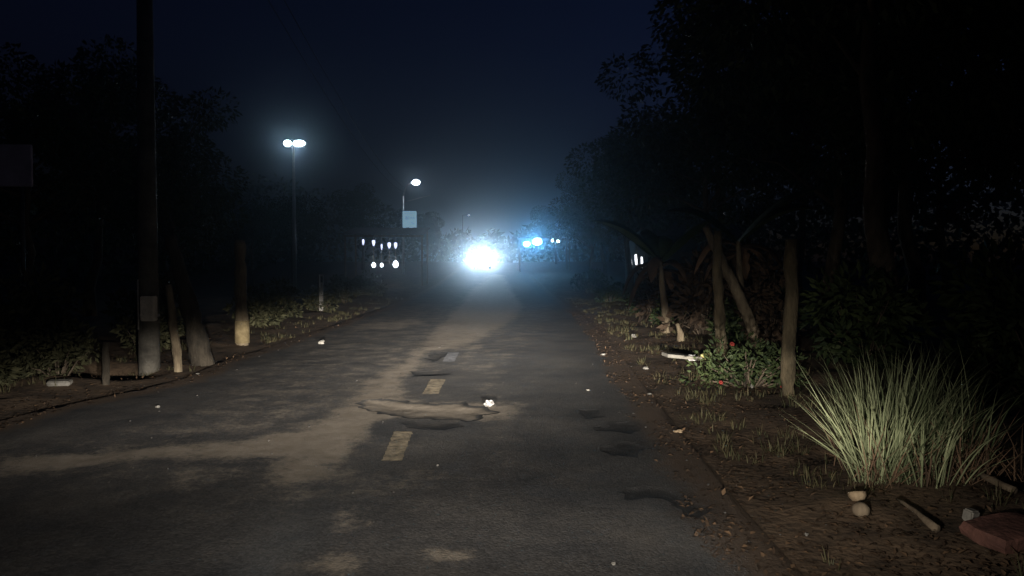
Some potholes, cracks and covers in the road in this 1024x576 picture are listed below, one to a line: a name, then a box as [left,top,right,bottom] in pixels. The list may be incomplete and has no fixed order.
pothole [399,421,464,430]
pothole [617,485,715,518]
pothole [600,441,651,458]
pothole [424,352,447,363]
pothole [593,421,641,434]
pothole [355,398,500,422]
pothole [578,409,607,420]
